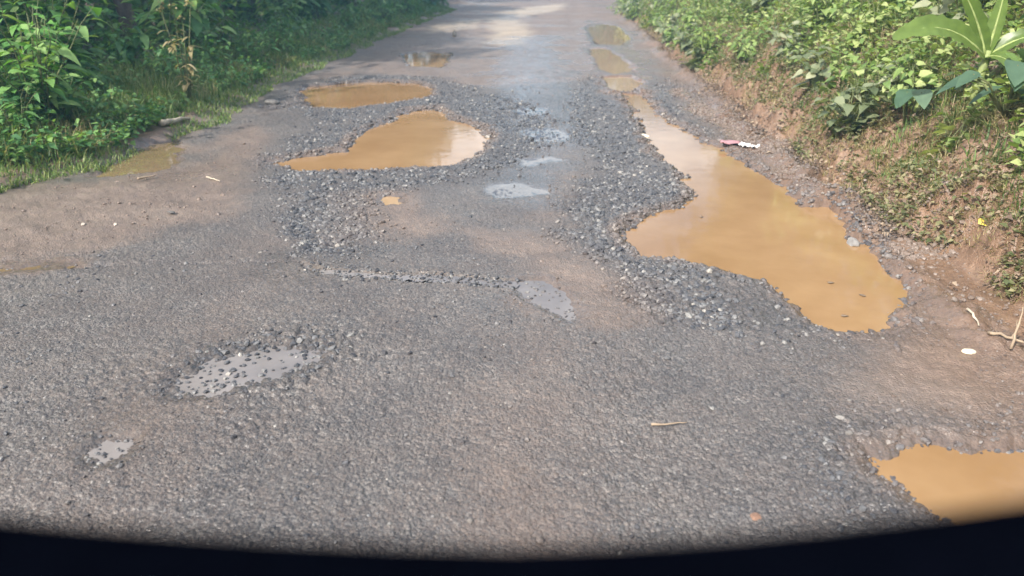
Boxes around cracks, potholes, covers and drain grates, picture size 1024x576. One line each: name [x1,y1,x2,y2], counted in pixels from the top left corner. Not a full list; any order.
pothole [501,272,592,325]
pothole [584,47,638,74]
pothole [370,191,410,207]
pothole [85,135,188,179]
pothole [292,78,437,109]
pothole [613,90,928,335]
pothole [263,104,498,171]
pothole [853,428,1024,514]
pothole [398,50,453,68]
pothole [585,23,633,45]
crack [289,260,520,288]
pothole [62,424,151,474]
